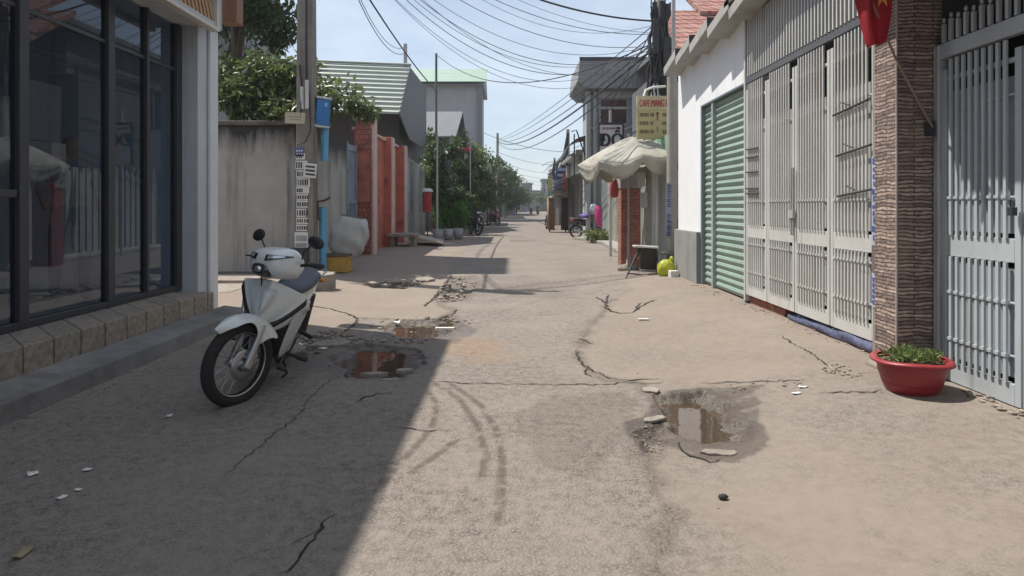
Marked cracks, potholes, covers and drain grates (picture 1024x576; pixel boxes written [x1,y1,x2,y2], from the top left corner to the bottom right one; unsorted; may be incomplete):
pothole [362,280,425,289]
pothole [433,275,484,303]
crack [575,338,657,381]
pothole [649,389,755,445]
crack [227,378,332,473]
crack [316,276,457,334]
crack [279,513,335,573]
pothole [382,314,463,339]
crack [596,295,654,313]
pothole [326,342,429,380]
